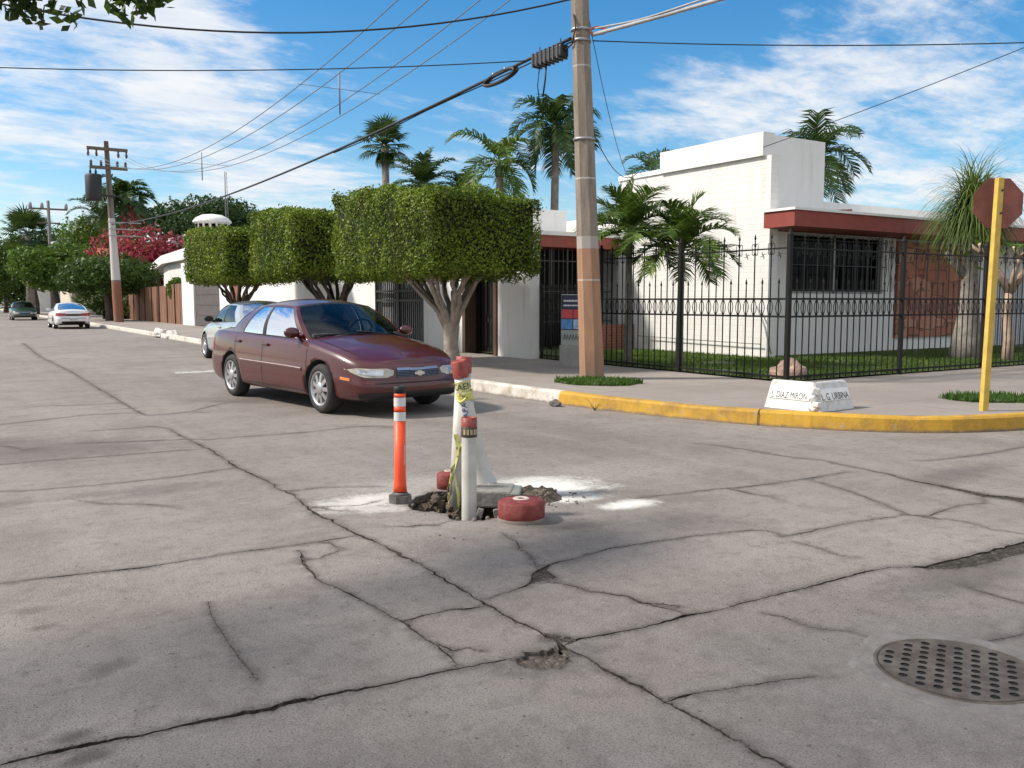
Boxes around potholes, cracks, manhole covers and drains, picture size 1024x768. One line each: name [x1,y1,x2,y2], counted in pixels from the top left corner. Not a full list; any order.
crack [578,484,981,558]
crack [298,542,485,664]
pothole [515,647,572,670]
crack [208,602,257,680]
crack [667,676,815,702]
manhole cover [848,632,1024,720]
pothole [408,491,494,521]
crack [487,535,681,612]
